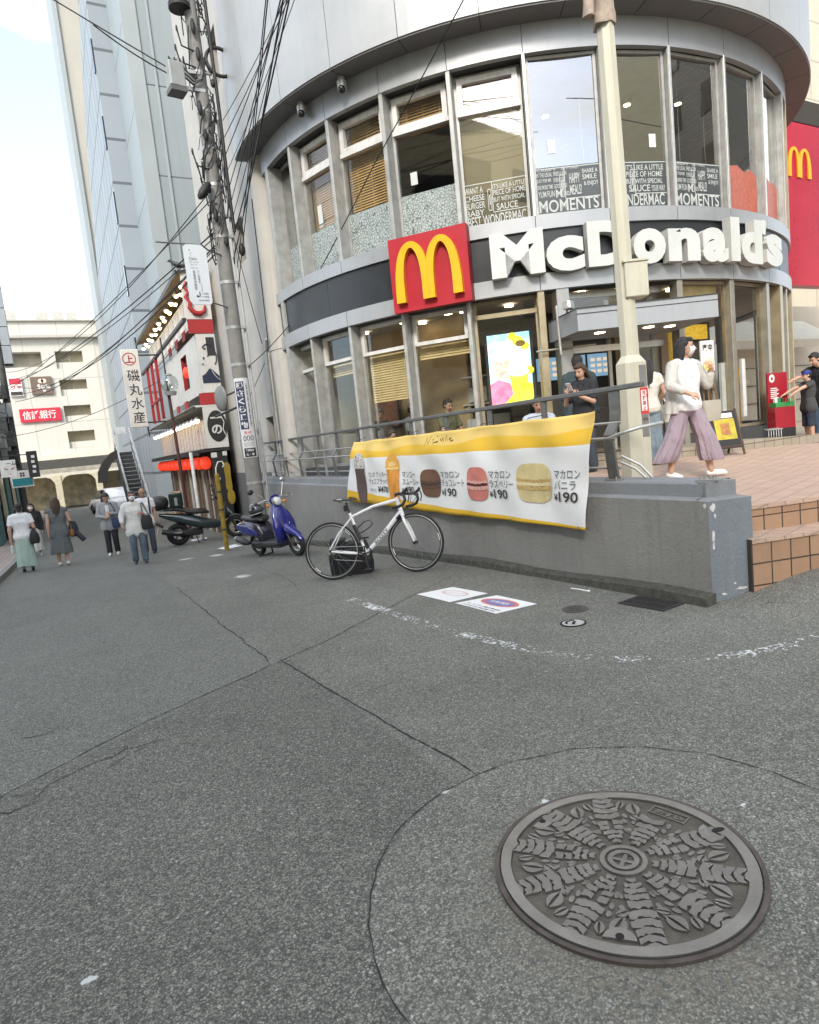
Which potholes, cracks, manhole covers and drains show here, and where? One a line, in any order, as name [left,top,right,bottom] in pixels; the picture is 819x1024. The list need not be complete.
drain grate [618,595,685,612]
manhole cover [561,605,589,613]
crack [0,740,159,814]
manhole cover [495,790,771,968]
manhole cover [560,619,587,627]
